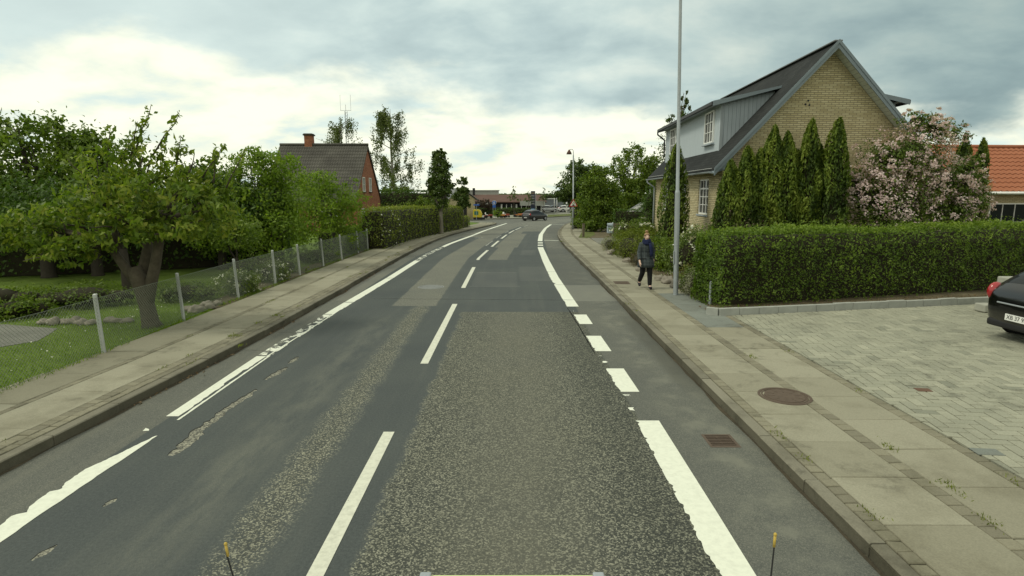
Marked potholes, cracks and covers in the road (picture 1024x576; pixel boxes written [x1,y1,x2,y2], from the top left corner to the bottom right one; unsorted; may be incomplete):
manhole cover [757,387,813,405]
drain grate [701,434,742,448]
